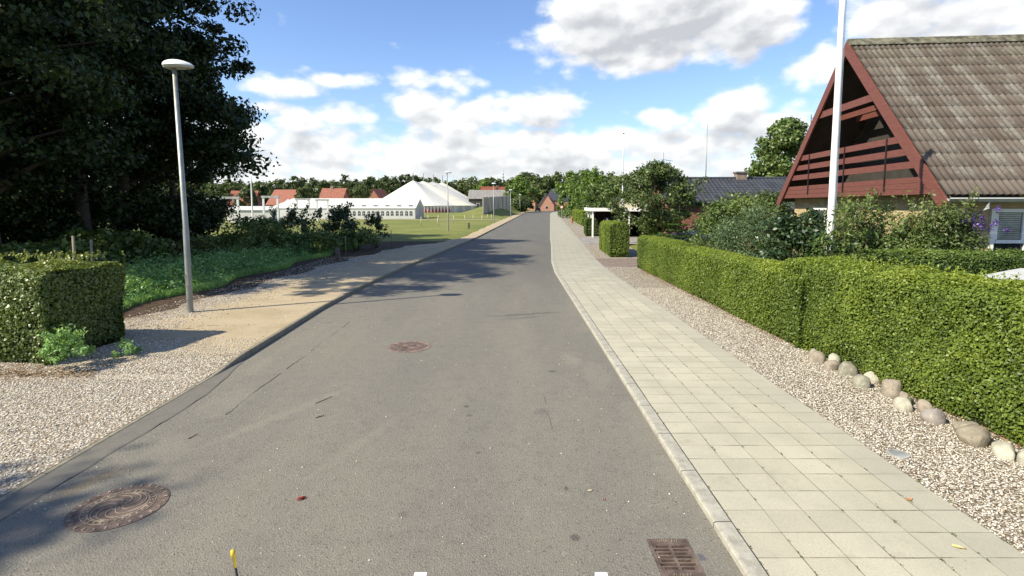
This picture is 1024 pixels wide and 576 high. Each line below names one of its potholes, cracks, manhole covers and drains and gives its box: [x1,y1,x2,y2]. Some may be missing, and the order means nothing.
manhole cover [387,341,431,353]
drain grate [647,538,706,576]
manhole cover [64,484,170,533]
